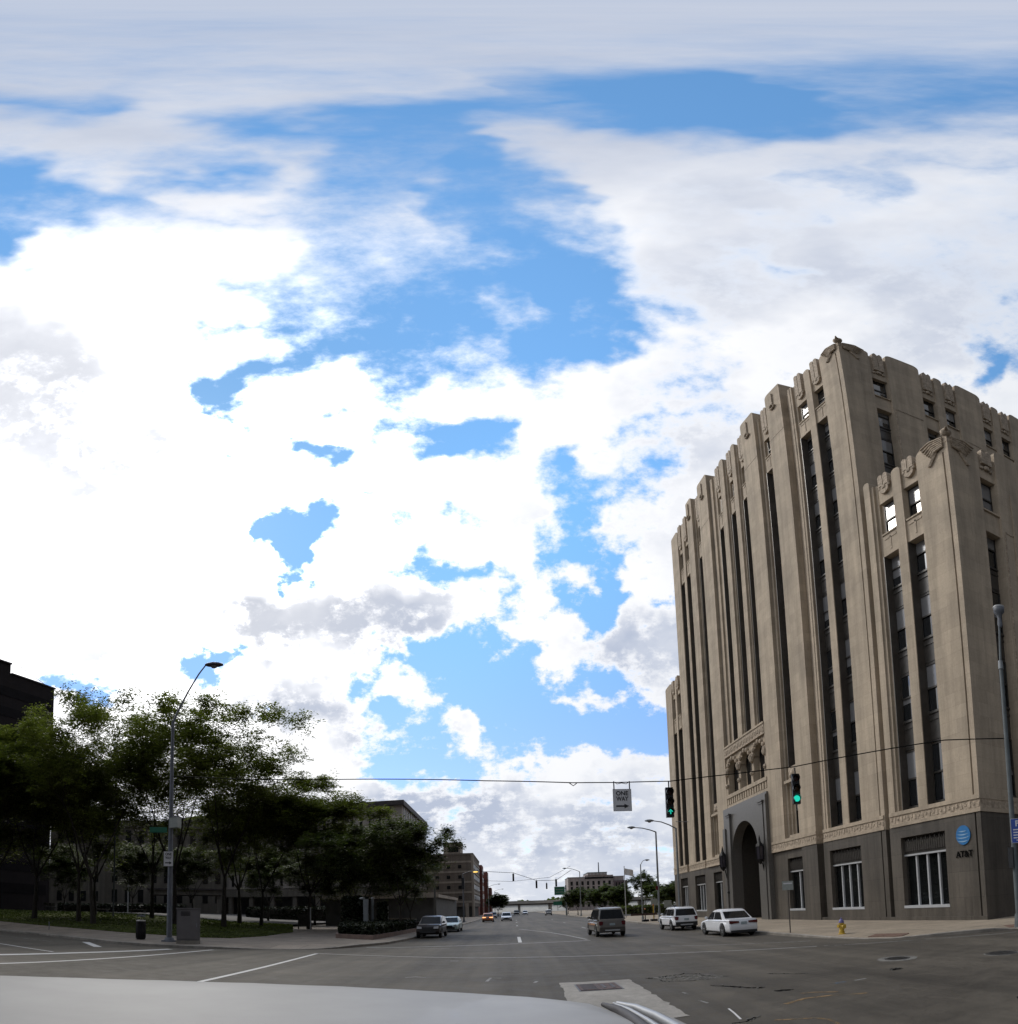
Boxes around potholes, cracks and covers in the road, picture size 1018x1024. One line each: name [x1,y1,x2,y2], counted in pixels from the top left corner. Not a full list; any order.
manhole cover [574,982,624,992]
